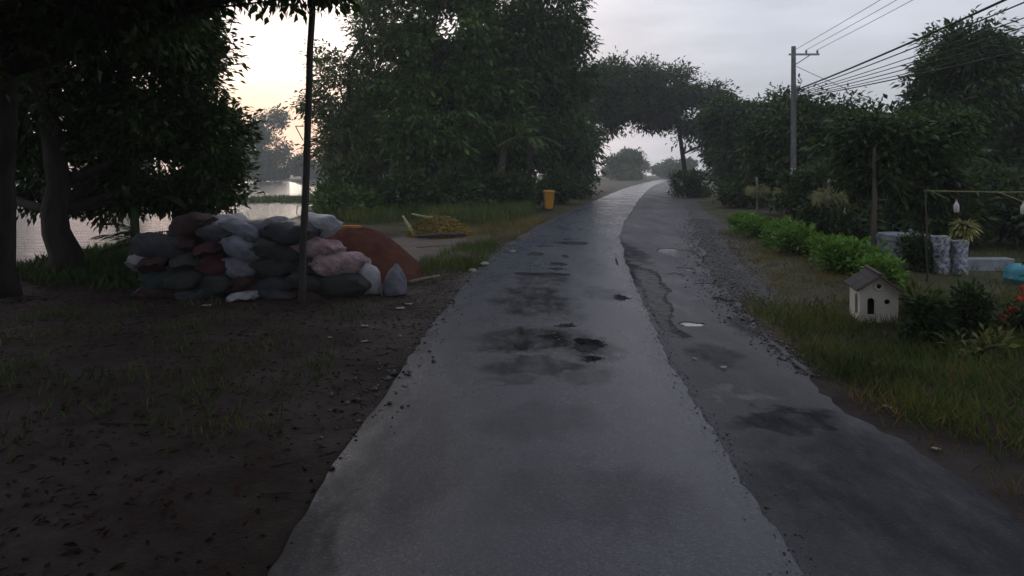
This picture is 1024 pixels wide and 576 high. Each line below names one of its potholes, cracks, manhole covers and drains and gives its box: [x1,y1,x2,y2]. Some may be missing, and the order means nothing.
pothole [633,267,693,340]
pothole [581,354,605,363]
pothole [571,337,607,353]
pothole [656,248,700,259]
